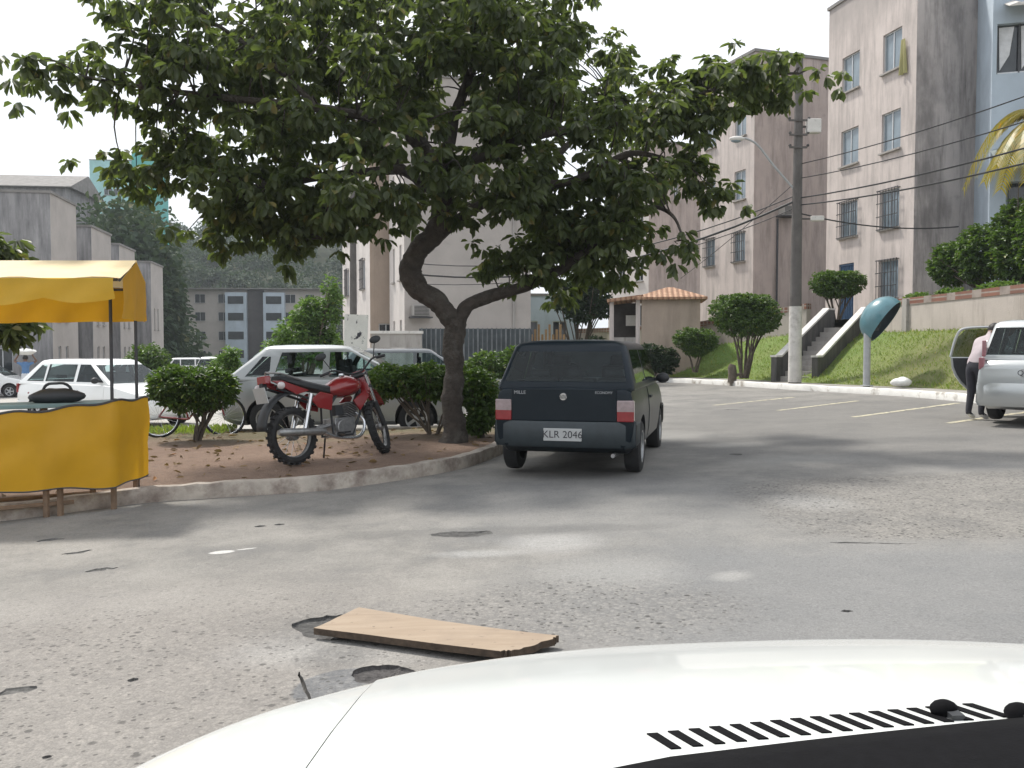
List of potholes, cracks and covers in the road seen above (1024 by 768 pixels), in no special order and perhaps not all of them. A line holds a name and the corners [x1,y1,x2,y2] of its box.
crack [36,538,119,572]
pothole [351,665,416,684]
crack [298,672,311,699]
pothole [292,614,346,640]
